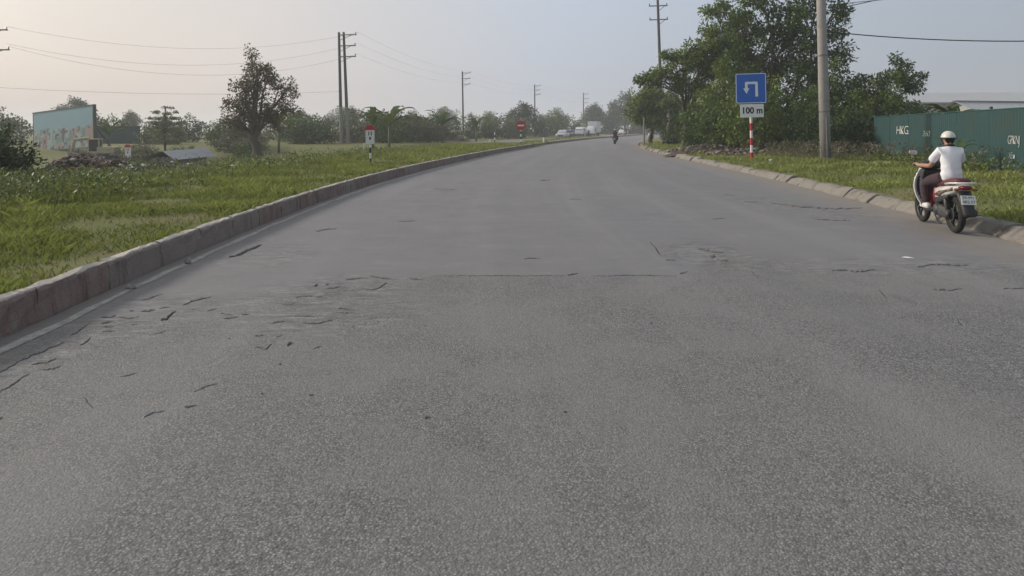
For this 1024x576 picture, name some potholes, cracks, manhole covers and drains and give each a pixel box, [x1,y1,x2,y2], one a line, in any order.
crack [698,248,762,278]
crack [650,242,687,275]
crack [185,384,216,408]
crack [0,276,393,392]
